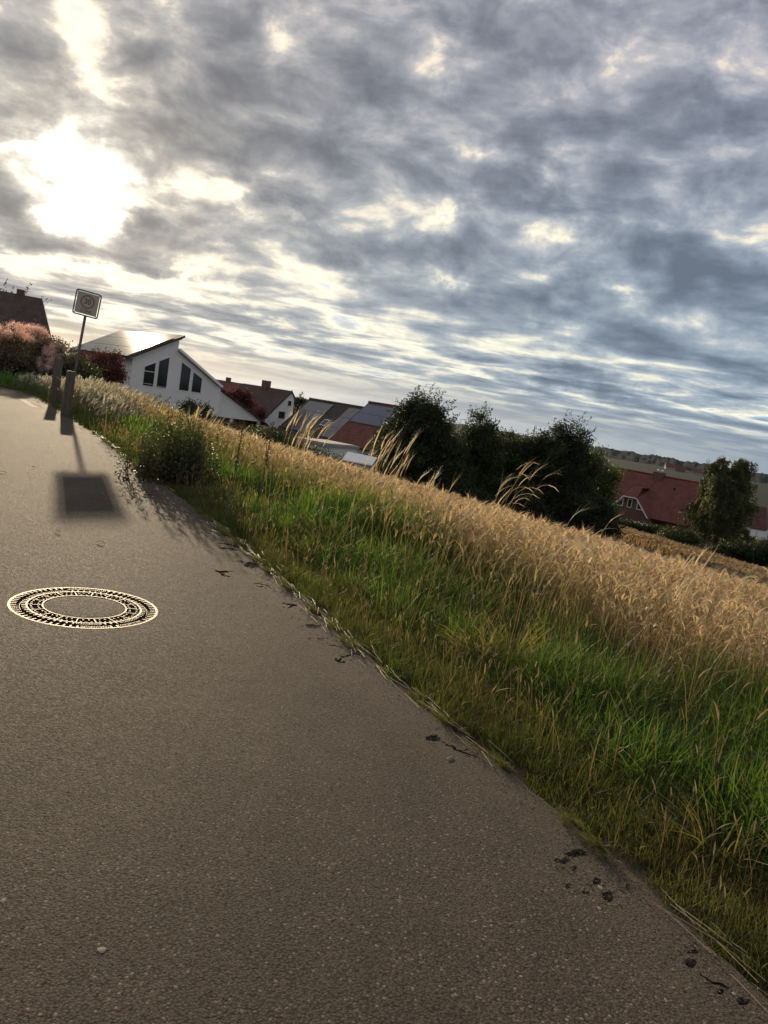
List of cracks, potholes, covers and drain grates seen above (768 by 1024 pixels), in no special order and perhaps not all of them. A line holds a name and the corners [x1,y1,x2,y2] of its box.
manhole cover [7,587,158,629]
crack [330,645,360,663]
pothole [565,849,587,858]
crack [443,742,476,757]
